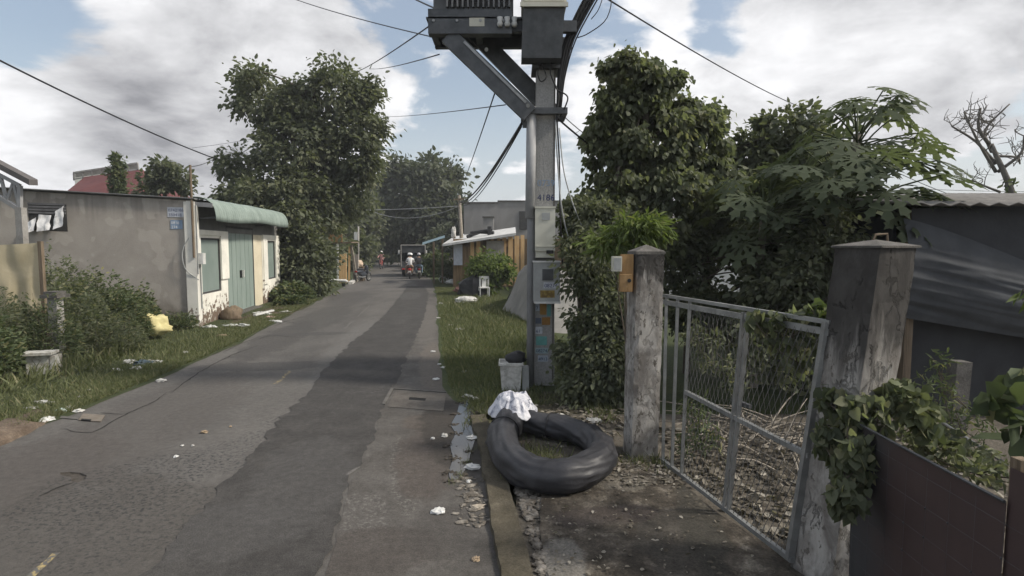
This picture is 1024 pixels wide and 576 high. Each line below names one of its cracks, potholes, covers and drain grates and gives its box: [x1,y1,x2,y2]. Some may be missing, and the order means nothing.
manhole cover [382,388,446,411]
pothole [60,472,87,482]
